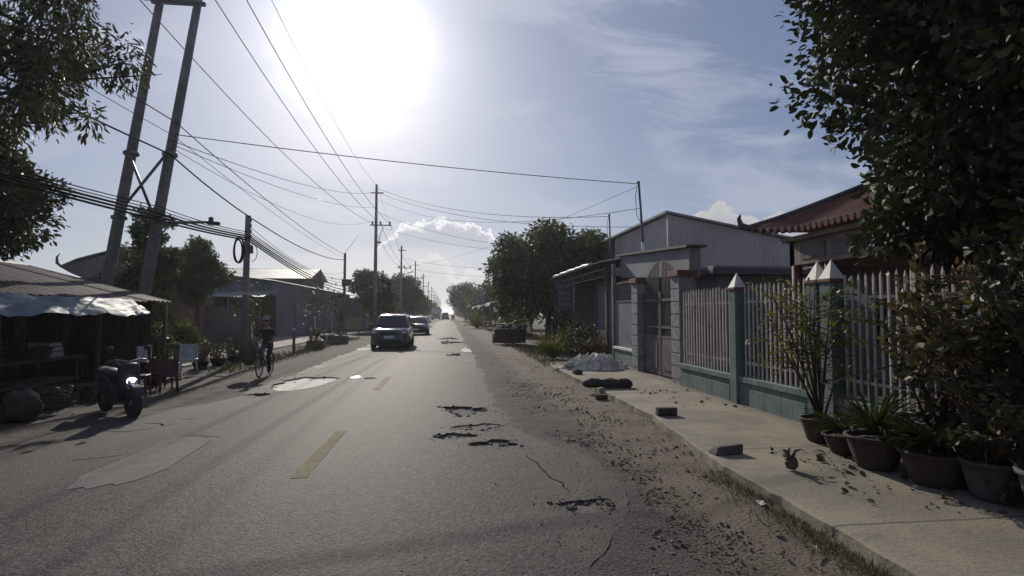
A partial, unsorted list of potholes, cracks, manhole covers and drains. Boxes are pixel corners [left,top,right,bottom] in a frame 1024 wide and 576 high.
pothole [437,405,488,417]
pothole [270,376,340,391]
pothole [450,423,503,431]
pothole [547,498,615,513]
pothole [468,439,523,447]
crack [527,456,570,492]
